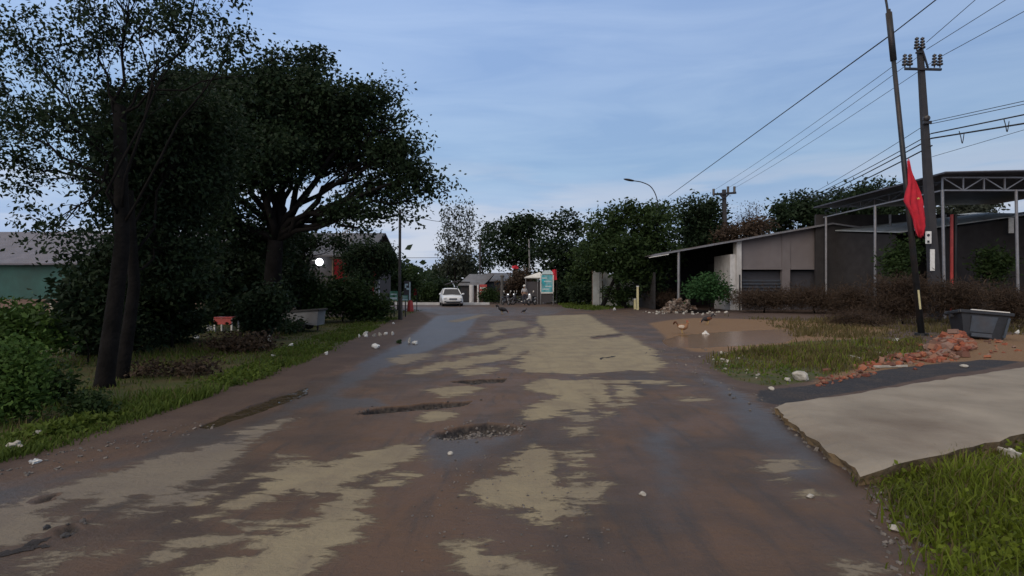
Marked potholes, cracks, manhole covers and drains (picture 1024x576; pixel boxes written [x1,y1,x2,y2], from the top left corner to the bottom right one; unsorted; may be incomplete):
pothole [339,399,486,419]
pothole [440,377,515,387]
pothole [183,385,322,433]
pothole [410,419,545,447]
